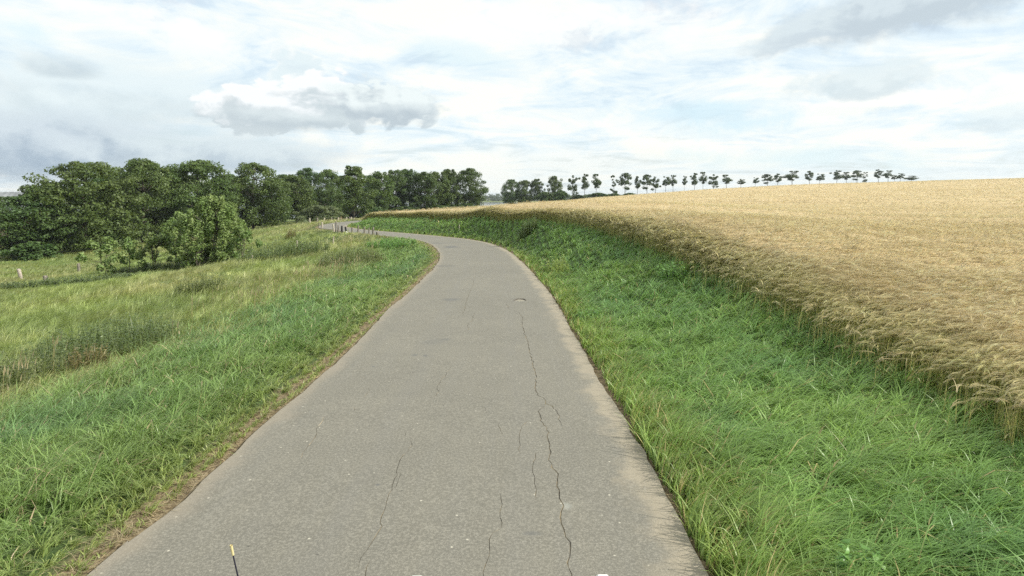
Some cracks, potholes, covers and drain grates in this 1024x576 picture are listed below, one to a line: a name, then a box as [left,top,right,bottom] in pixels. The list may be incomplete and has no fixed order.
crack [483,500,502,576]
crack [358,439,411,576]
crack [499,317,572,576]
